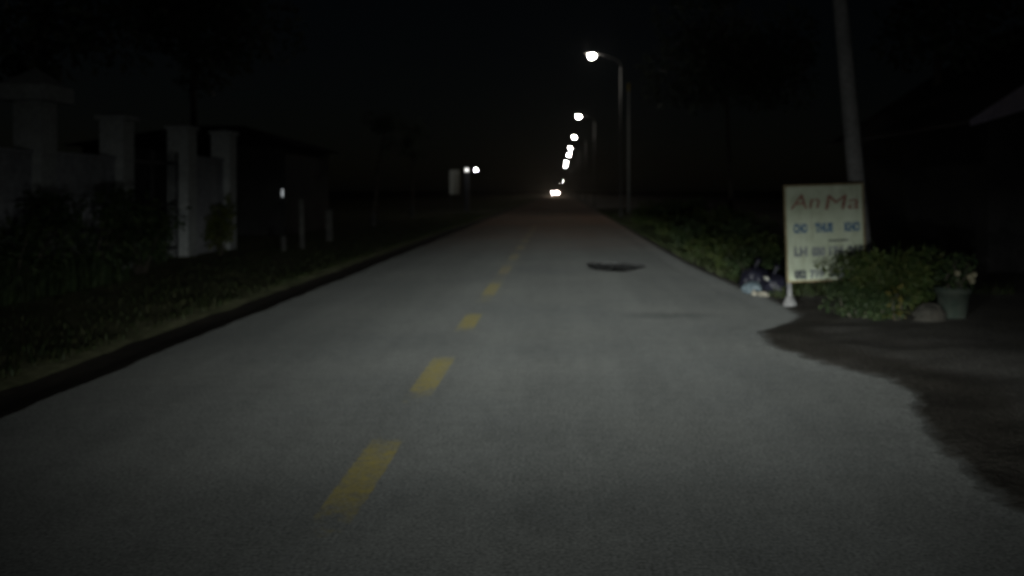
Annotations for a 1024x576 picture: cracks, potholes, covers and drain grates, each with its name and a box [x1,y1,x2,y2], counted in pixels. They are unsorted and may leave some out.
pothole [587,262,645,272]
